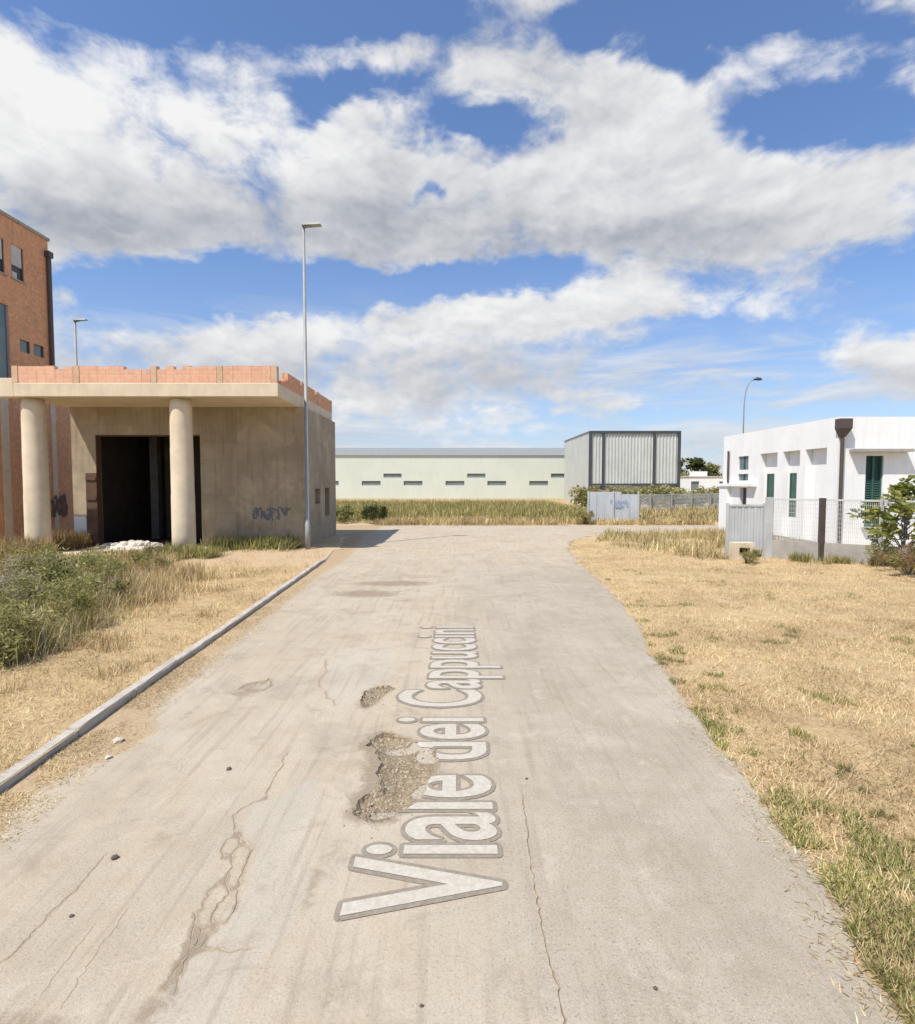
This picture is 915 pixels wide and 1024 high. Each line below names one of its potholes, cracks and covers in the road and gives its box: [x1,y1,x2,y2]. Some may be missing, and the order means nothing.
pothole [355,681,398,712]
pothole [340,726,445,839]
crack [521,787,567,1024]
crack [0,854,128,1009]
crack [318,659,336,706]
crack [162,751,291,995]
